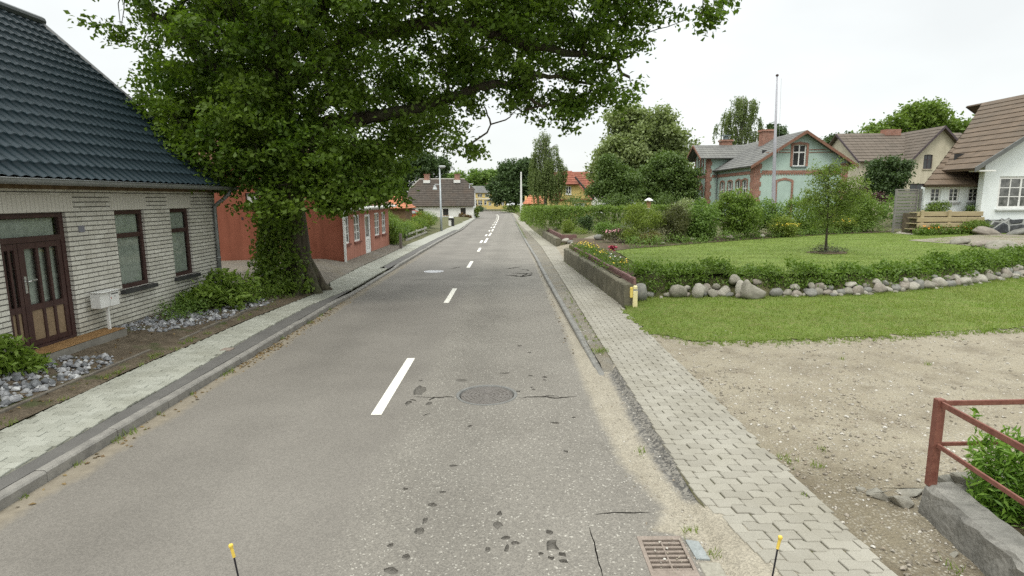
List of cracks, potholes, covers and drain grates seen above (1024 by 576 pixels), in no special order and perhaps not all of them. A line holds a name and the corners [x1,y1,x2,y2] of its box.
manhole cover [456,385,517,406]
drain grate [637,536,700,576]
crack [588,512,649,576]
